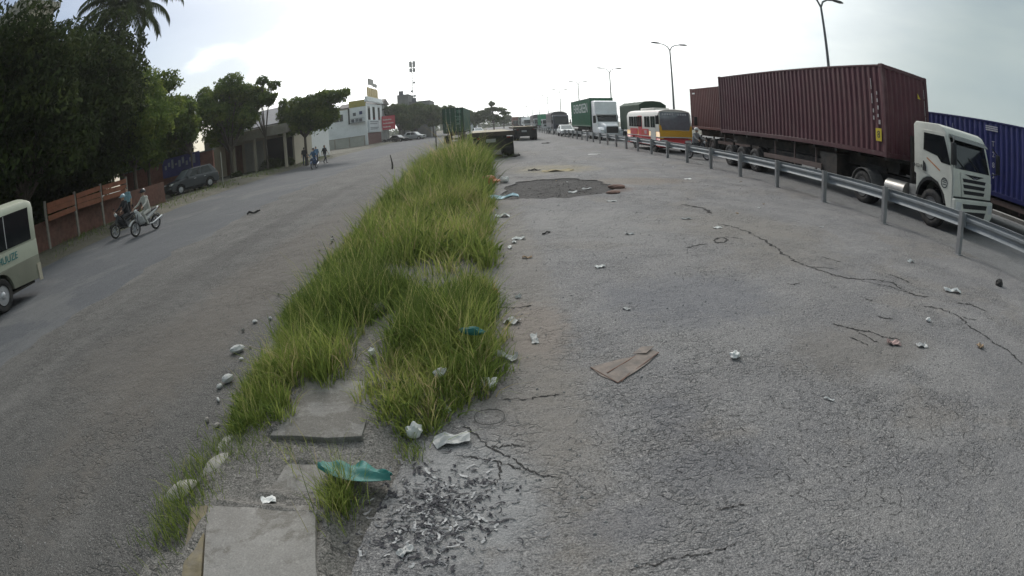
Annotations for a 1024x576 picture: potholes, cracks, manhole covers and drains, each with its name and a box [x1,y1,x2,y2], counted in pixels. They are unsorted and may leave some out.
crack [681,204,1024,365]
crack [631,541,742,570]
crack [460,389,999,515]
pothole [501,178,614,199]
